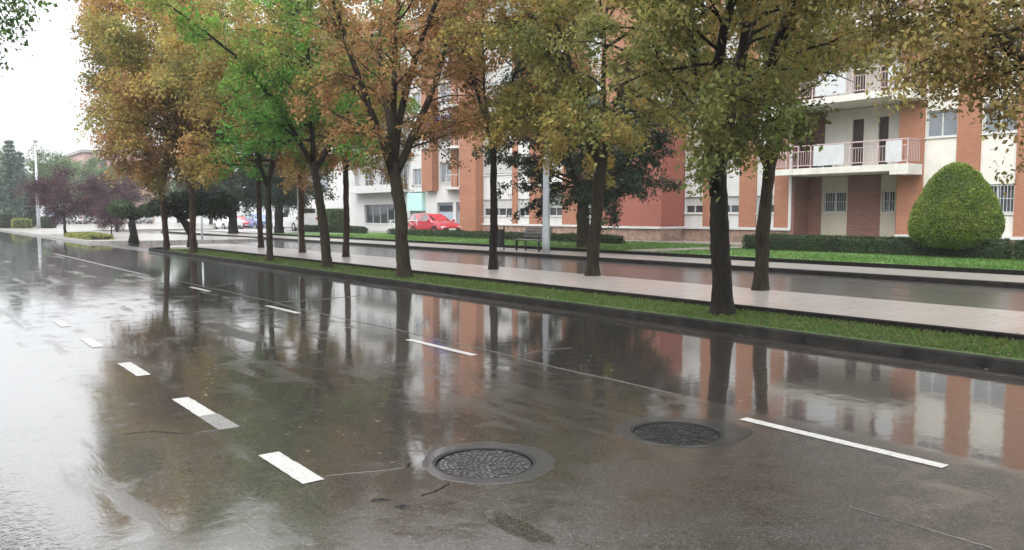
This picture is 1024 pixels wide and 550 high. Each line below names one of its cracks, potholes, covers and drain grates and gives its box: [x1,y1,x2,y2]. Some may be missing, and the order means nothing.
crack [326,462,449,497]
crack [127,425,247,434]
manhole cover [422,441,555,485]
manhole cover [613,416,754,448]
